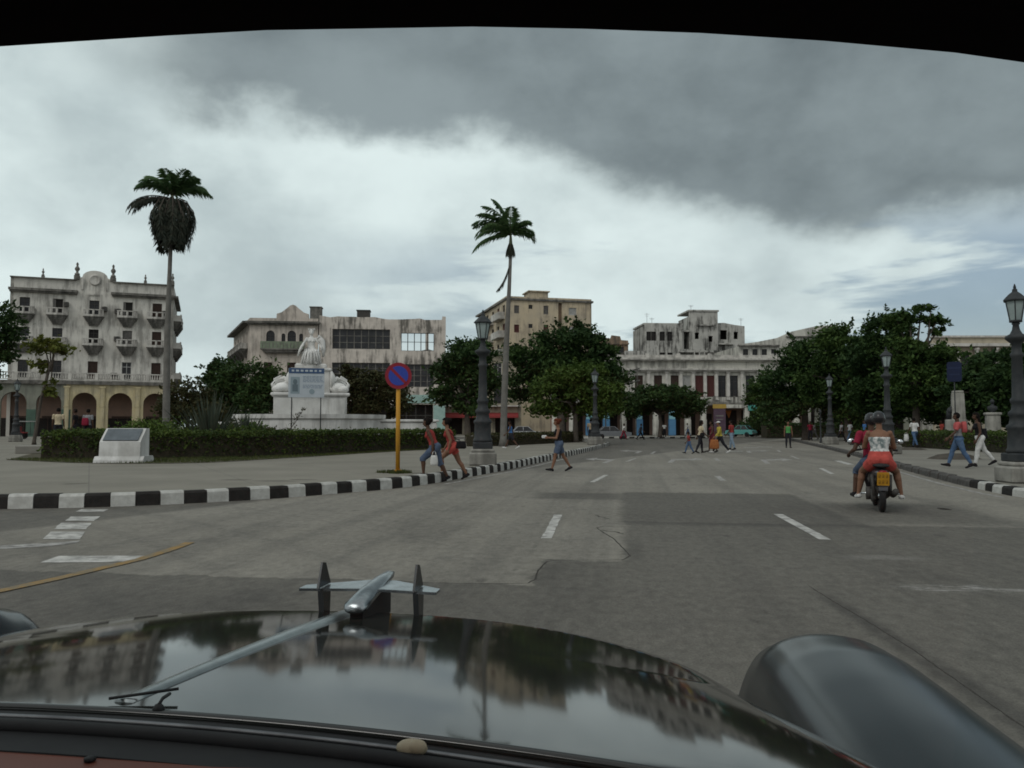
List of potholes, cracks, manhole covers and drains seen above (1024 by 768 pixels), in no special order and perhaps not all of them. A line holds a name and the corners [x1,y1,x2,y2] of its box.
crack [402,515,631,584]
